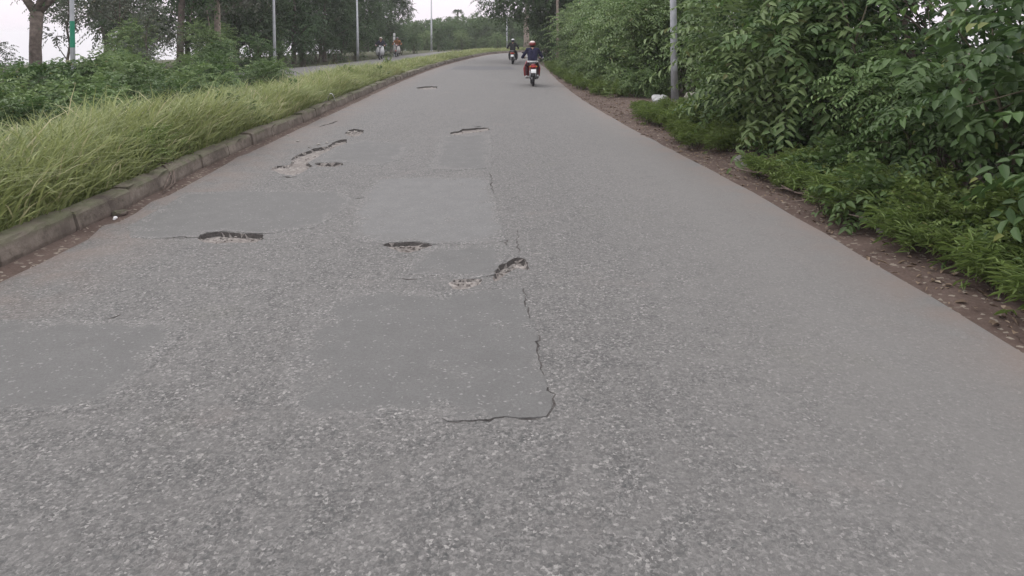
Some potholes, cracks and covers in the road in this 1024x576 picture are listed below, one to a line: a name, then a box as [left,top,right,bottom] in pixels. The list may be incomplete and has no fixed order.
pothole [383,242,432,253]
crack [450,288,556,423]
pothole [448,279,482,290]
pothole [198,232,264,244]
pothole [271,139,347,176]
pothole [493,257,530,282]
